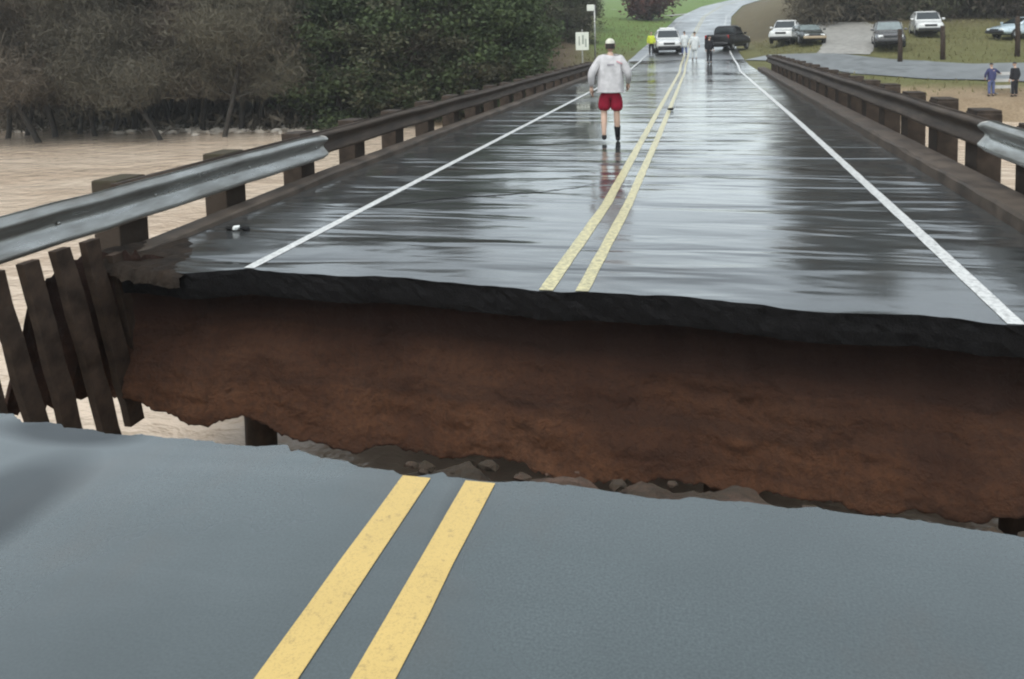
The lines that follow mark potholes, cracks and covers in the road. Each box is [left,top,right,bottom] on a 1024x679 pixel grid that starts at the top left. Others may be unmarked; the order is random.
pothole [5,237,1024,537]
